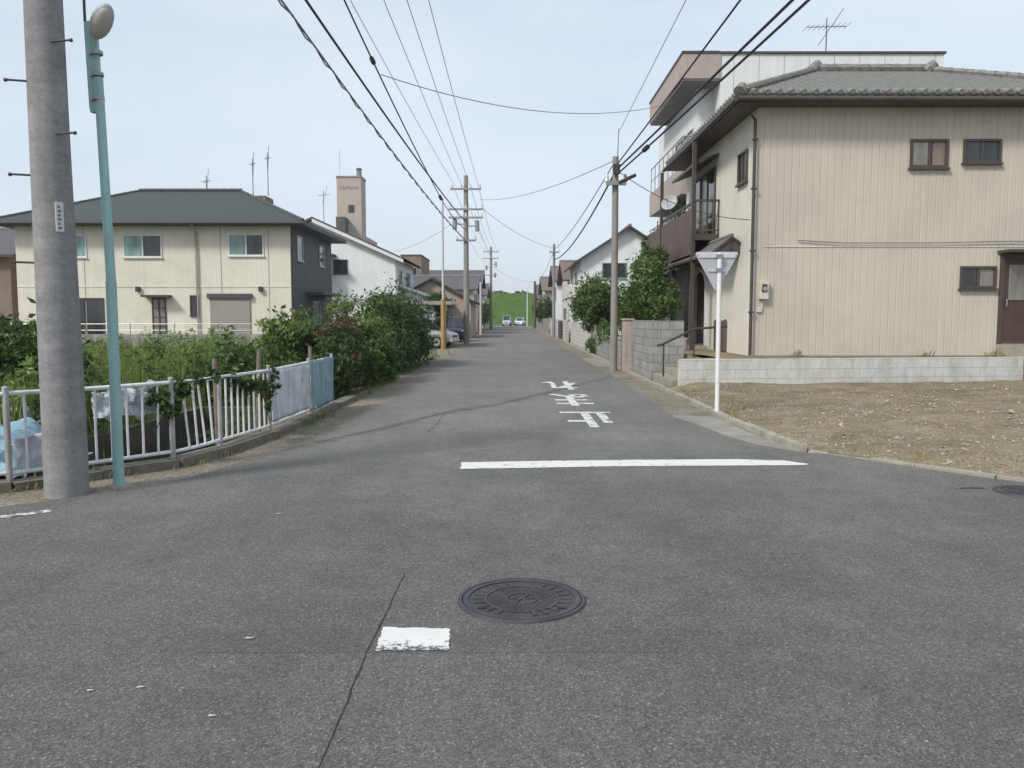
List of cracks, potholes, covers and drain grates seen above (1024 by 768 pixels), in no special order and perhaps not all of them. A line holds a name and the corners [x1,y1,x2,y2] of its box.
manhole cover [992,485,1024,498]
crack [317,383,583,443]
crack [225,573,740,768]
manhole cover [457,578,586,624]
